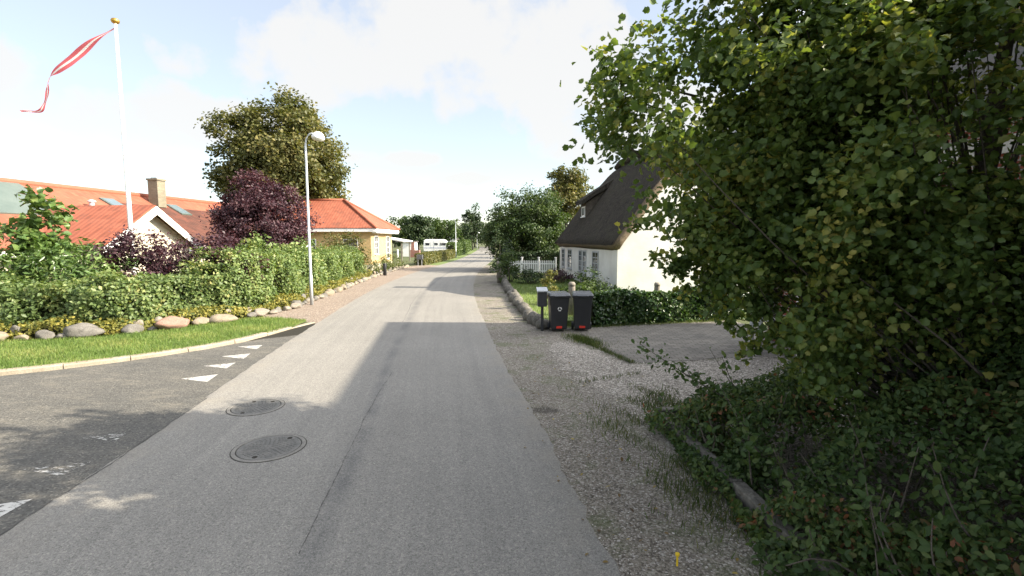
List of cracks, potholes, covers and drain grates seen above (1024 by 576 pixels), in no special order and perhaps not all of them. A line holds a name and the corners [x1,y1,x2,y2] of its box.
manhole cover [226,398,285,416]
manhole cover [230,434,307,463]
